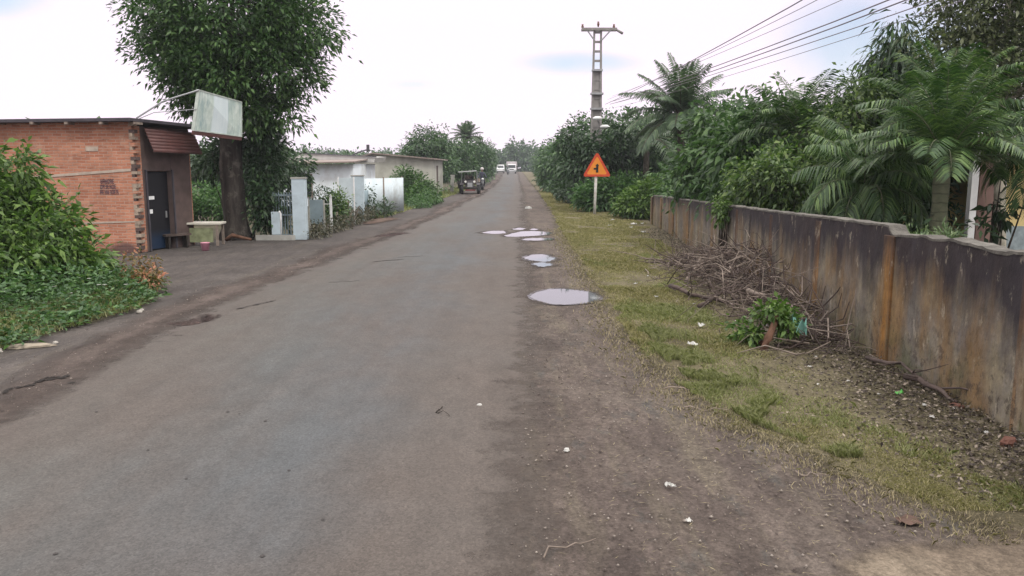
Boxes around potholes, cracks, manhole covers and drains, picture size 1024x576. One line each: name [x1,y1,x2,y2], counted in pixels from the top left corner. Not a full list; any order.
pothole [478,227,555,241]
pothole [519,254,561,267]
pothole [169,315,218,326]
pothole [527,288,604,305]
crack [2,374,70,393]
